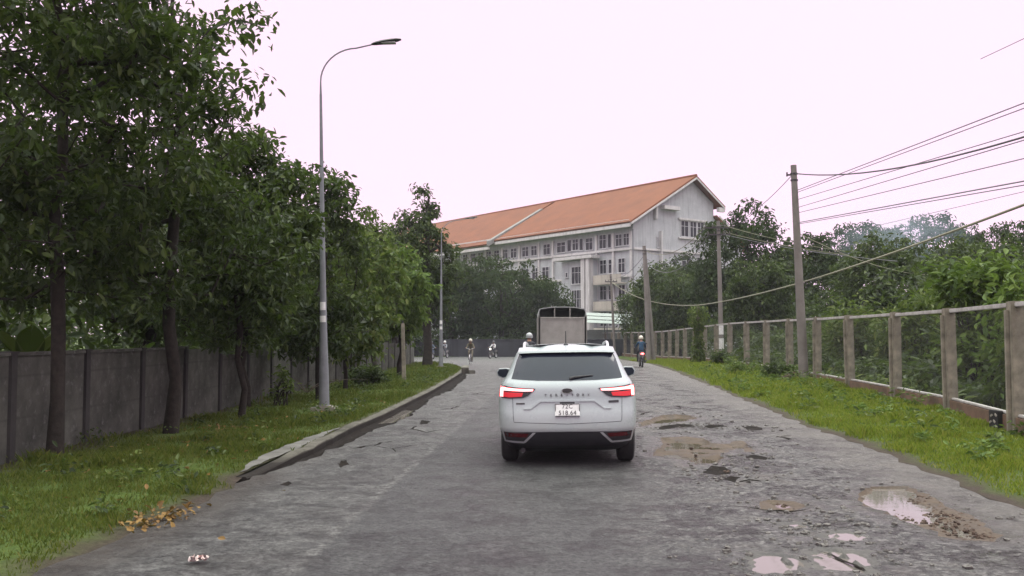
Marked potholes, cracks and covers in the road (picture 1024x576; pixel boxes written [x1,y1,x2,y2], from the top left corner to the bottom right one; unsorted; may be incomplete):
pothole [759,500,806,511]
pothole [811,530,871,542]
crack [357,426,437,452]
pothole [703,466,731,475]
pothole [653,436,756,464]
pothole [639,414,696,426]
pothole [800,546,880,575]
pothole [743,550,811,576]
pothole [858,486,1003,542]
